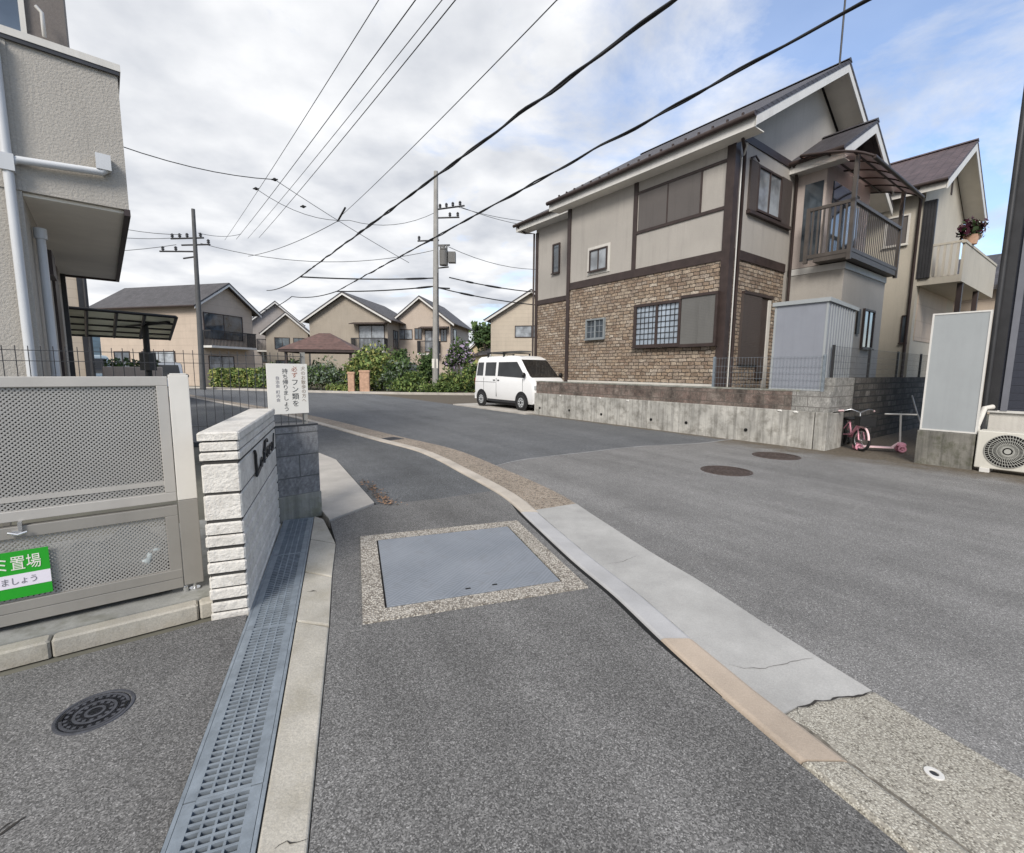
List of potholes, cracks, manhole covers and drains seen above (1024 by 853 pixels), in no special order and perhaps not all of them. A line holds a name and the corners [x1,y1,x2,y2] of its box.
manhole cover [51,689,135,736]
manhole cover [700,465,753,476]
drain grate [246,552,306,631]
drain grate [166,783,263,853]
drain grate [183,623,293,805]
manhole cover [752,452,801,460]
drain grate [273,517,312,556]
